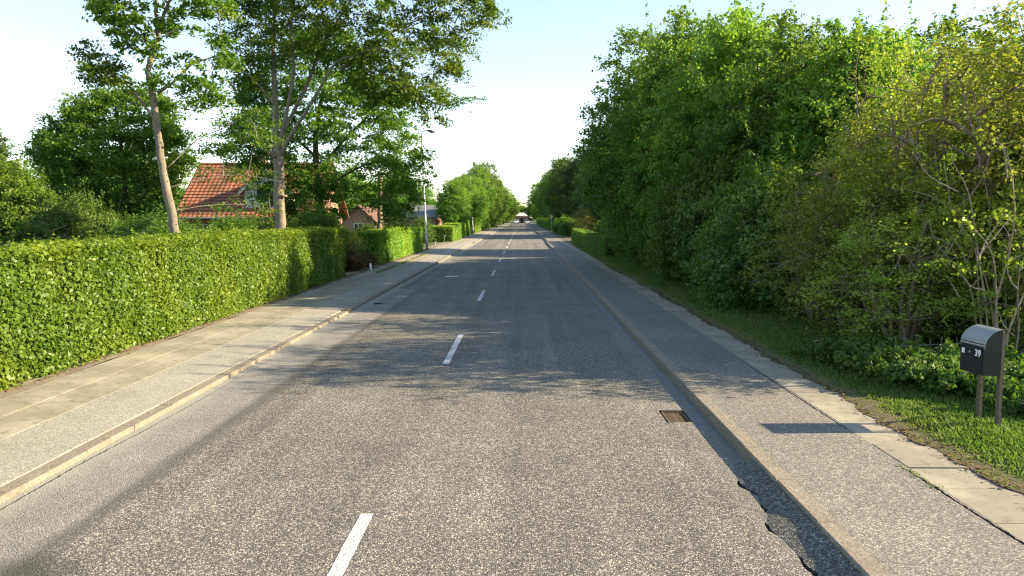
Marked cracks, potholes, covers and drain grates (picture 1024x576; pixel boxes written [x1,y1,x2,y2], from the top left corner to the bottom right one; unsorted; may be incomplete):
drain grate [661,412,691,423]
